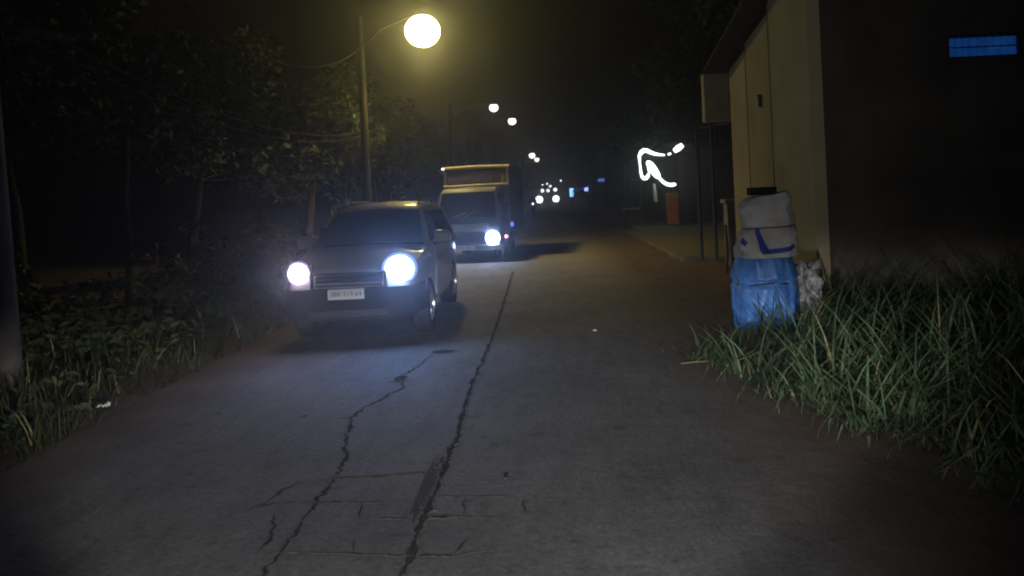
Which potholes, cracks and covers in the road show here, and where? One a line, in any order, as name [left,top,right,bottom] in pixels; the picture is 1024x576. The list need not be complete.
crack [244,354,527,576]
